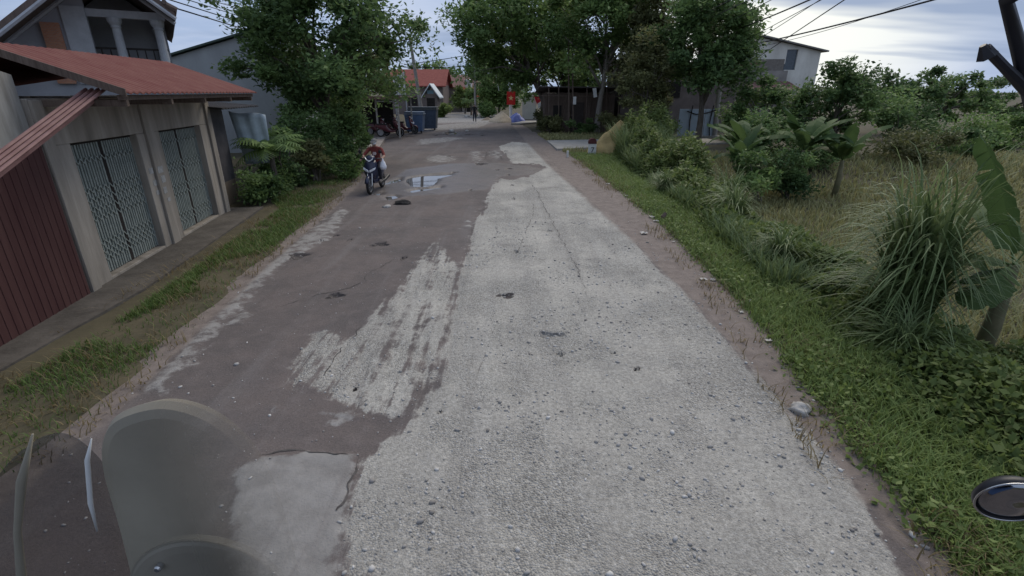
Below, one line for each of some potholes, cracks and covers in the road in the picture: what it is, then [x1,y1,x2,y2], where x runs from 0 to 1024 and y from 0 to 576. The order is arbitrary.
crack [517,163,586,293]
crack [262,449,359,510]
